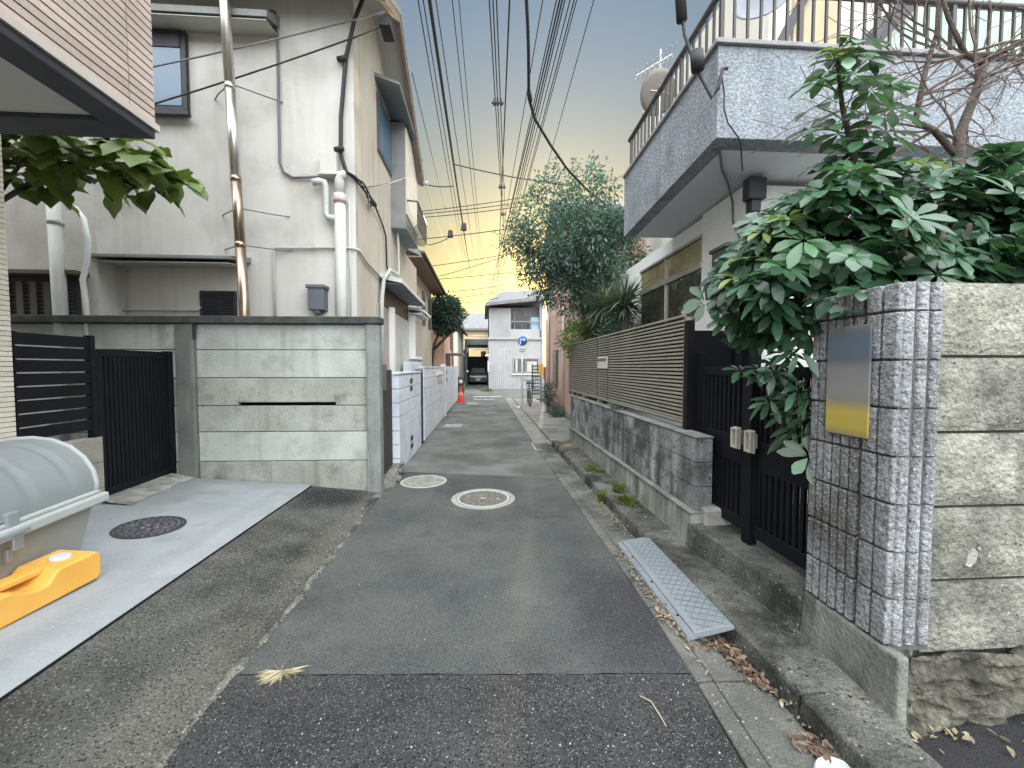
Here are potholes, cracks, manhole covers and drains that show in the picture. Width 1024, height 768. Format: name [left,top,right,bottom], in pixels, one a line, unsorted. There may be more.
manhole cover [400,475,447,488]
manhole cover [109,516,187,539]
manhole cover [451,489,515,510]
